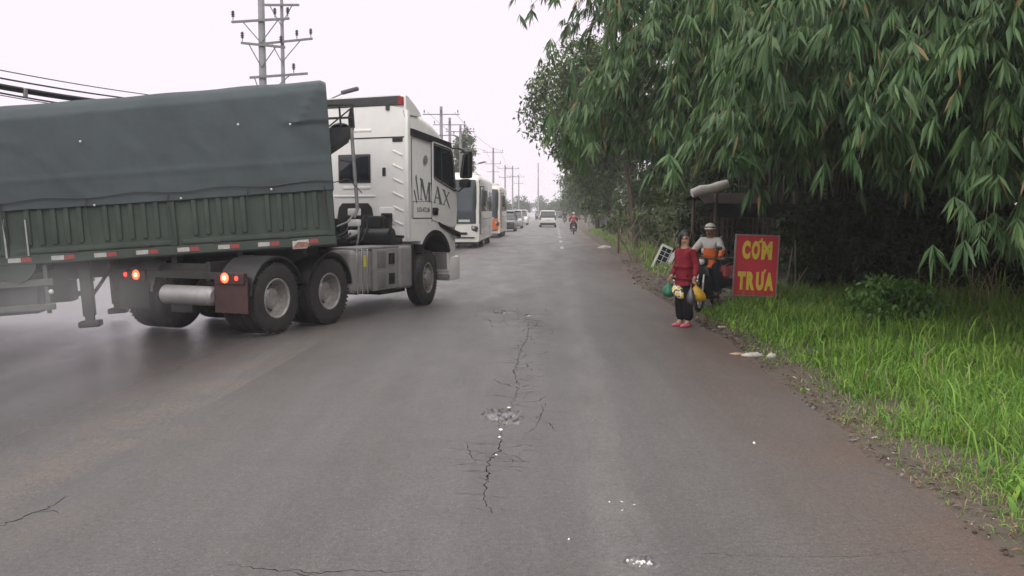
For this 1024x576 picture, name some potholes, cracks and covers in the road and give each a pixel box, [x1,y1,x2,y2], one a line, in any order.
pothole [618,554,664,569]
crack [441,308,562,512]
crack [228,564,415,576]
pothole [480,408,529,425]
crack [2,497,65,526]
